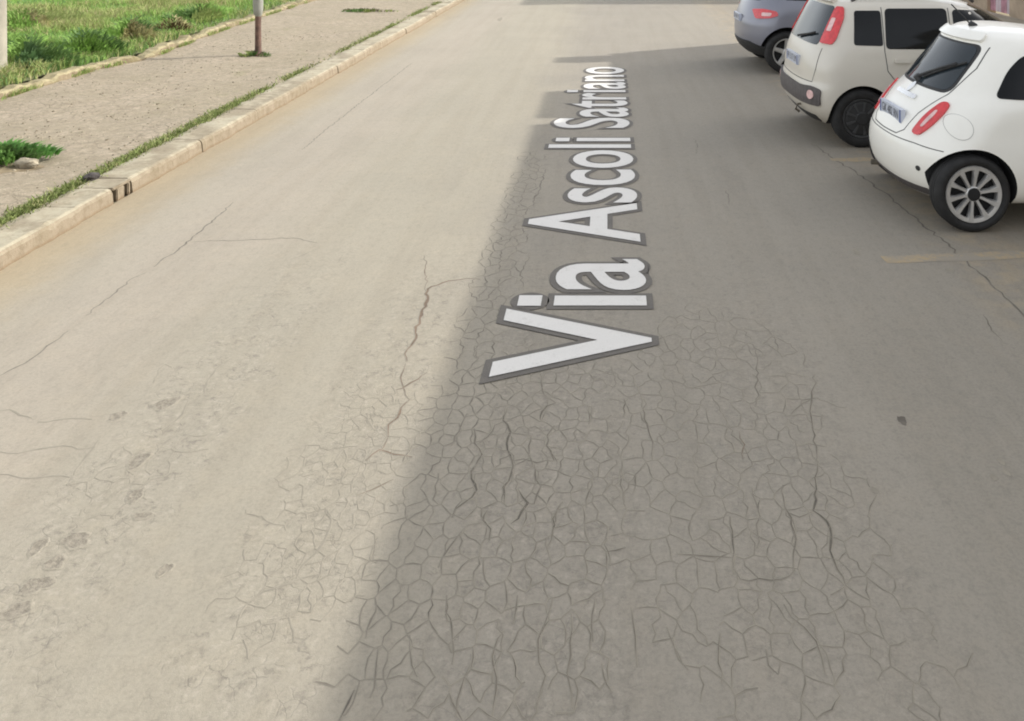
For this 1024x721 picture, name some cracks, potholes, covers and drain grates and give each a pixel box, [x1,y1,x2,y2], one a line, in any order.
crack [205,150,974,721]
crack [0,358,236,519]
crack [88,202,317,315]
